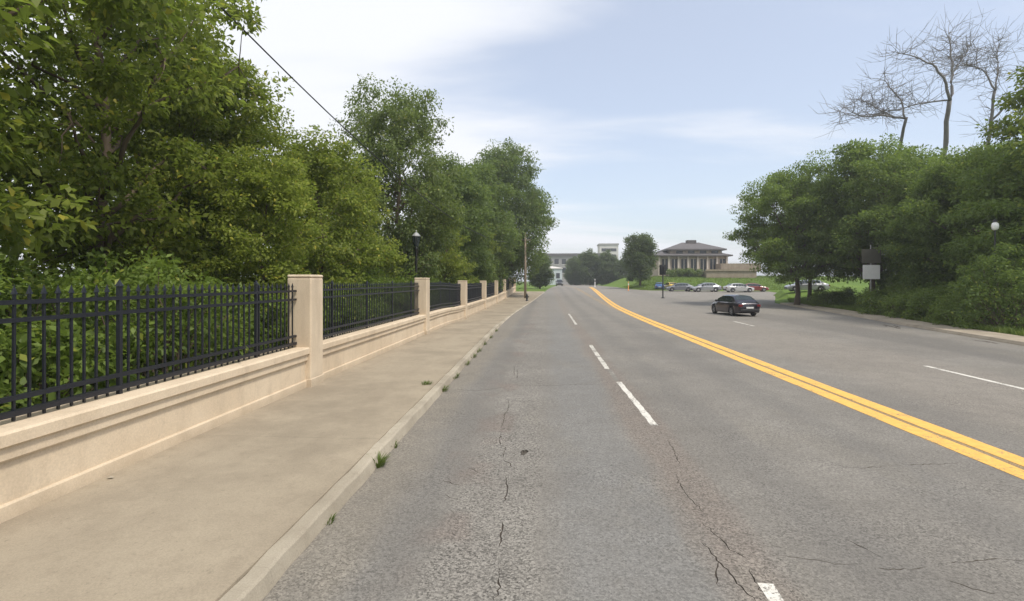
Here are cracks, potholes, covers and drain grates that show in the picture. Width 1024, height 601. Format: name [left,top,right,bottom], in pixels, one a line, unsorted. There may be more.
crack [444,367,576,600]
crack [775,539,1019,594]
crack [667,439,763,600]
